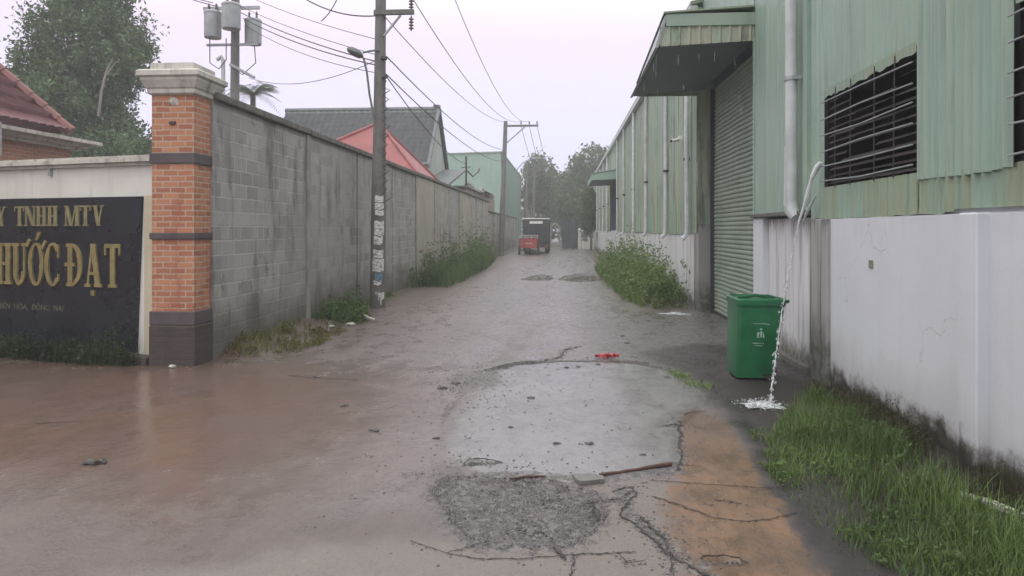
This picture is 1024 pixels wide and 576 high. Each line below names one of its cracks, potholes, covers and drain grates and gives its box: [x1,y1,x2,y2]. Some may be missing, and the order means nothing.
pothole [426,475,609,551]
pothole [462,458,503,467]
crack [502,346,676,374]
crack [410,411,791,576]
pothole [557,273,602,282]
